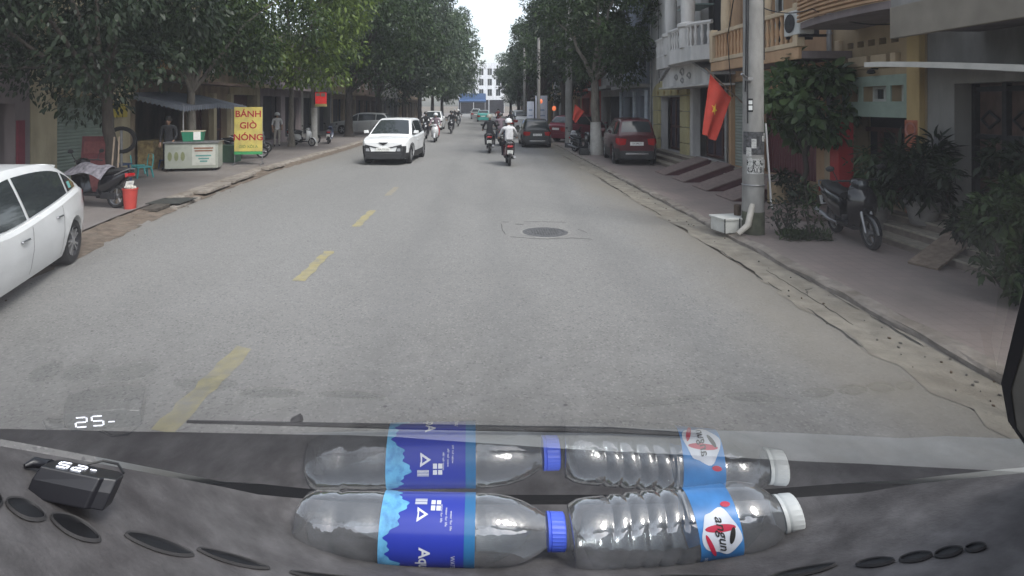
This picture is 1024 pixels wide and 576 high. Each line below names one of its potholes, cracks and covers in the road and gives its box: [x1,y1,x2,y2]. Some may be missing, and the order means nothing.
manhole cover [520,227,571,239]
crack [720,250,863,347]
